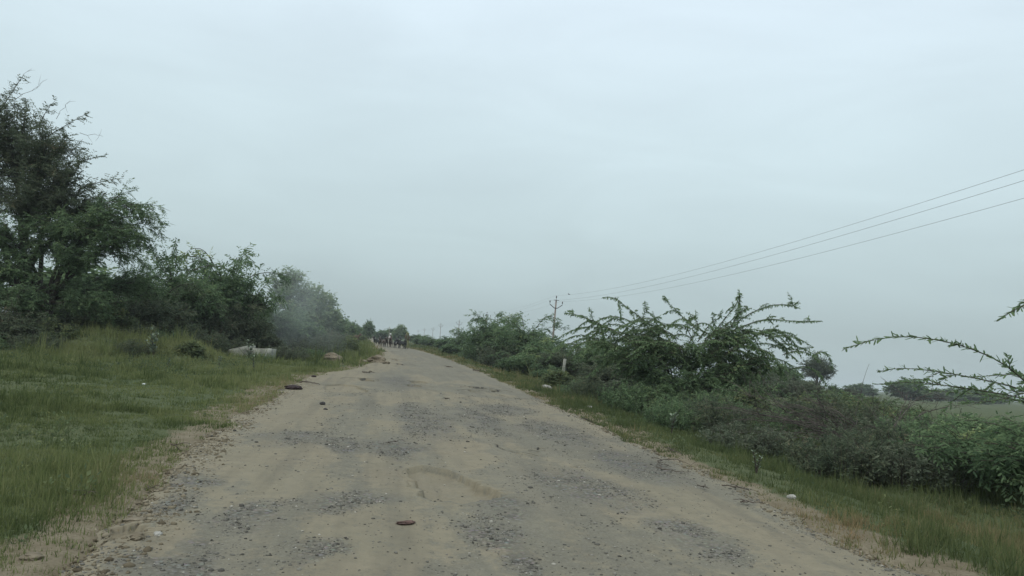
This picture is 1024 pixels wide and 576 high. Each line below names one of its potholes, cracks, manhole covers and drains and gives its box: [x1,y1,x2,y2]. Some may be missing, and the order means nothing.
pothole [396,464,516,507]
